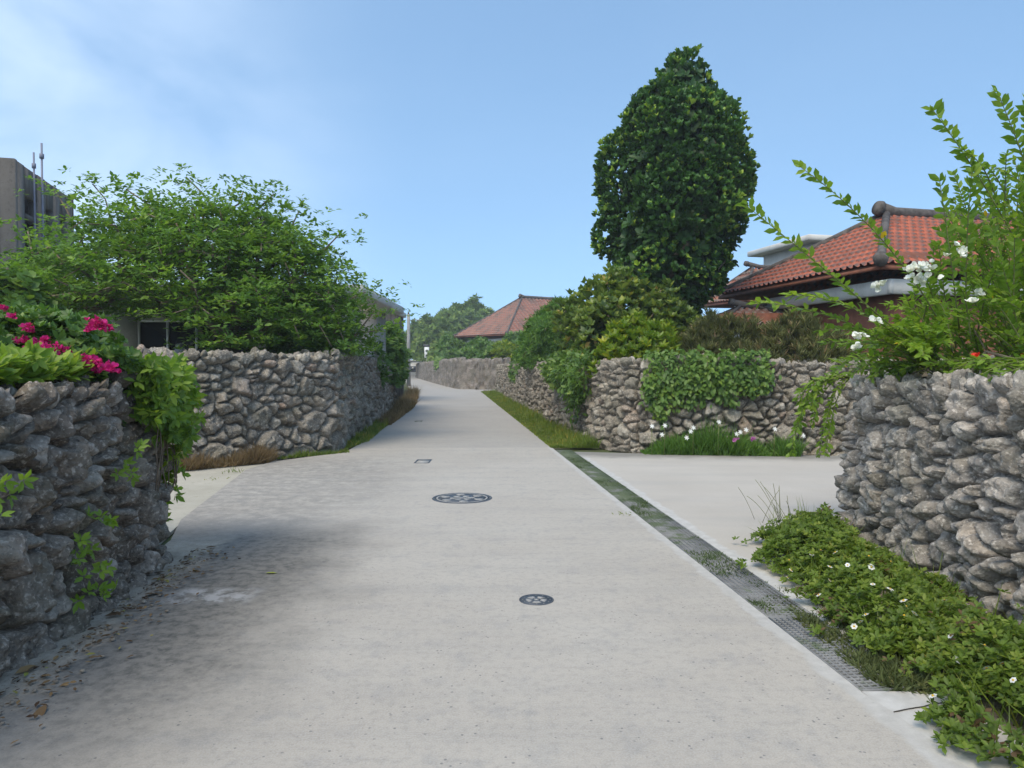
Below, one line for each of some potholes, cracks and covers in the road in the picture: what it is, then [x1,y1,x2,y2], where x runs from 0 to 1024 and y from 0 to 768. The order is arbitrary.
drain grate [710,570,814,618]
drain grate [618,498,667,517]
drain grate [768,616,918,692]
manhole cover [519,594,554,606]
drain grate [586,473,622,485]
drain grate [575,464,604,474]
manhole cover [432,493,492,504]
drain grate [600,485,641,499]
drain grate [640,516,701,540]
drain grate [670,539,747,572]
